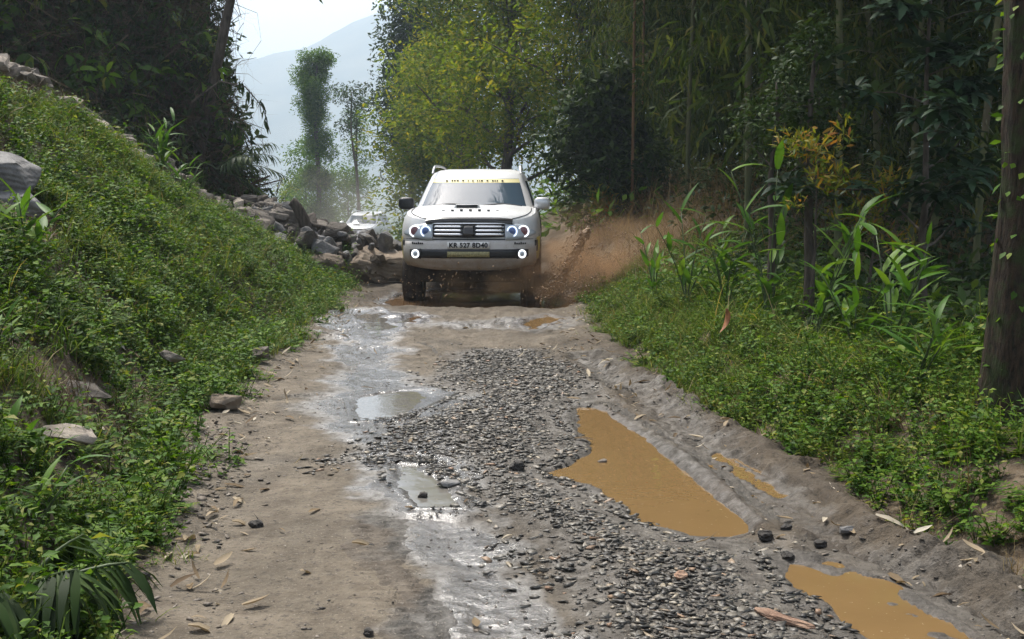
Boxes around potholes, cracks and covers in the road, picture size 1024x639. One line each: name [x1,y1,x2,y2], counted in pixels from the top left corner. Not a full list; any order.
pothole [343,386,457,423]
pothole [375,458,471,510]
pothole [545,402,766,540]
pothole [706,448,812,517]
pothole [515,313,567,333]
pothole [766,550,987,639]
